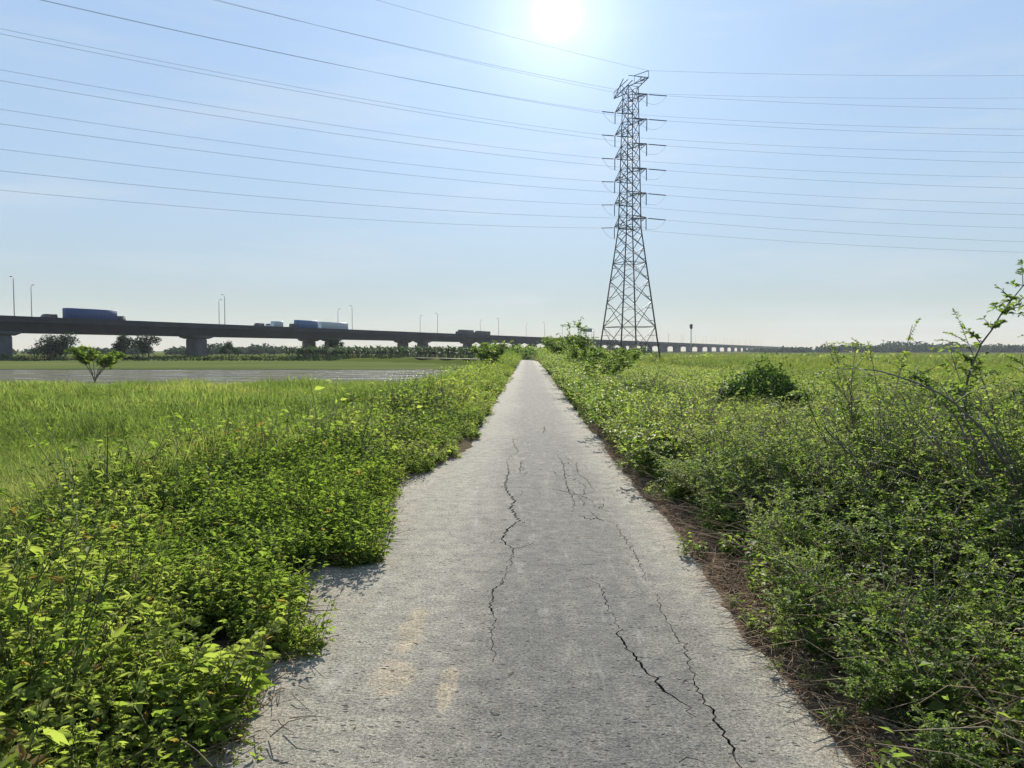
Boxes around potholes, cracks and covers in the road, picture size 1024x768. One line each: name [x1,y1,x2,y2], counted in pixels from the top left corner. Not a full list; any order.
crack [488,437,742,768]
